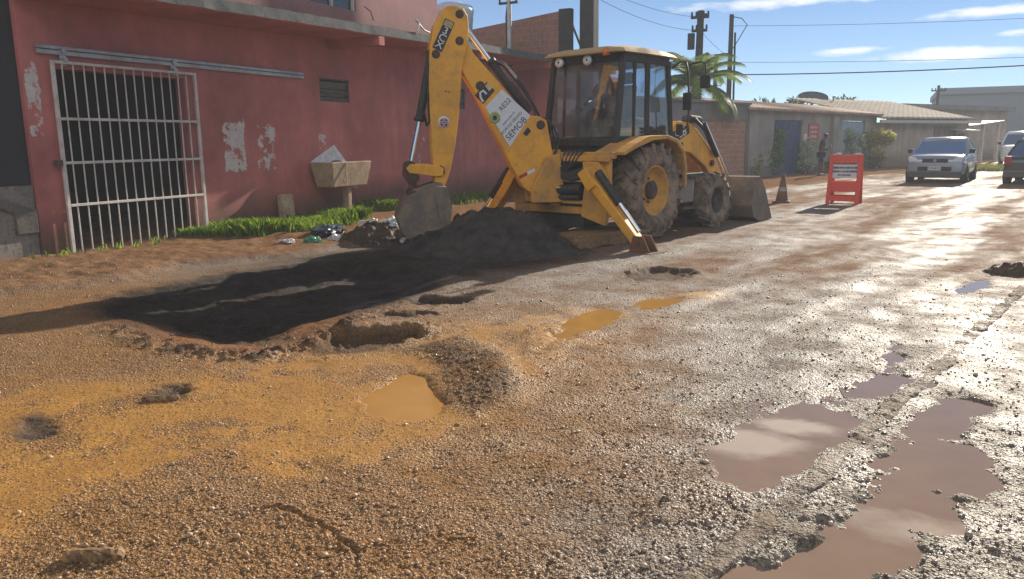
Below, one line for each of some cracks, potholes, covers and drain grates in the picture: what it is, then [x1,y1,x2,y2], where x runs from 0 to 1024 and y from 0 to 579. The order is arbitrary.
crack [165,503,476,579]
pothole [2,411,68,444]
pothole [945,278,1000,295]
pothole [619,266,702,283]
pothole [142,381,199,402]
pothole [694,400,862,508]
pothole [347,365,463,424]
pothole [400,294,477,307]
